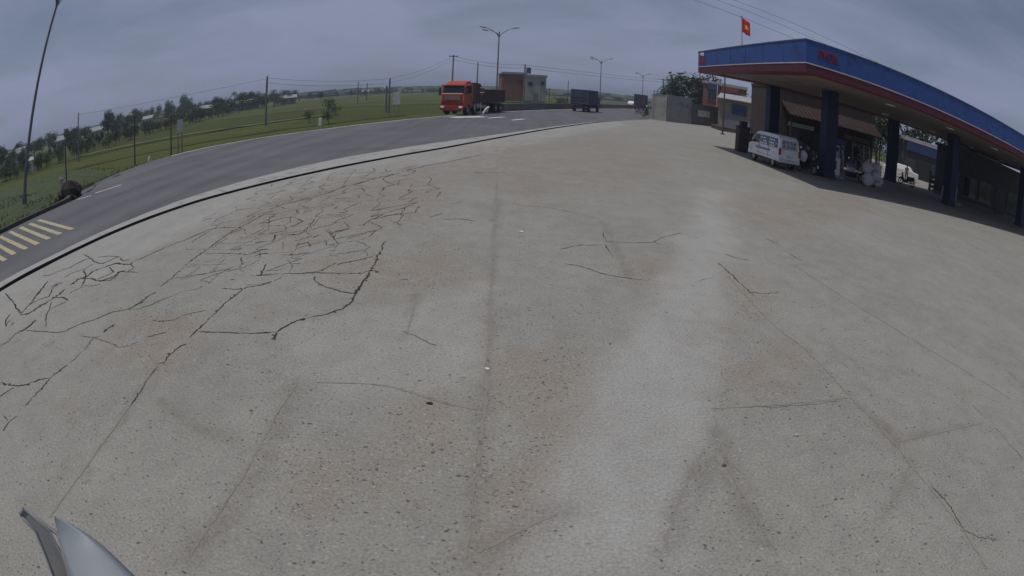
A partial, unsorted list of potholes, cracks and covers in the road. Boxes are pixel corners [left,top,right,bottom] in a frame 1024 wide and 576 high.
crack [1,150,500,404]
crack [562,232,678,281]
